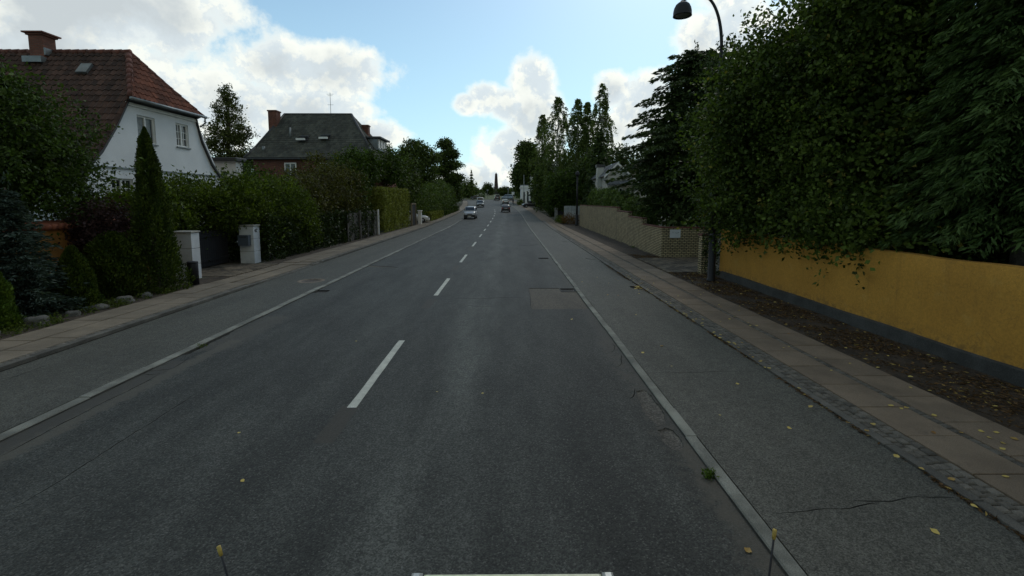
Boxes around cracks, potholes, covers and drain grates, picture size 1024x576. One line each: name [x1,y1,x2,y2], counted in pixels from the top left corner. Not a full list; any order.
crack [776,496,952,514]
crack [6,397,190,514]
crack [2,359,187,456]
